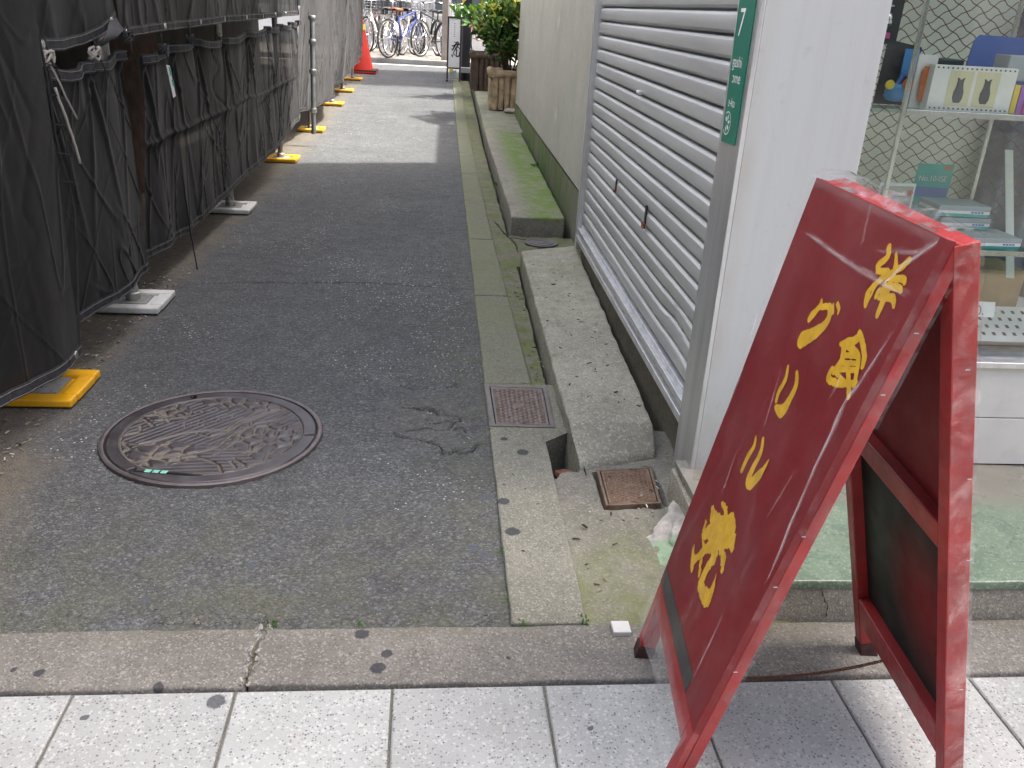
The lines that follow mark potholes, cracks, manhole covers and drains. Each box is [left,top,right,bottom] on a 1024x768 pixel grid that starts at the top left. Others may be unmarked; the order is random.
manhole cover [525,238,558,249]
manhole cover [484,385,555,428]
manhole cover [98,390,322,489]
manhole cover [596,467,661,510]
crack [410,410,477,455]
